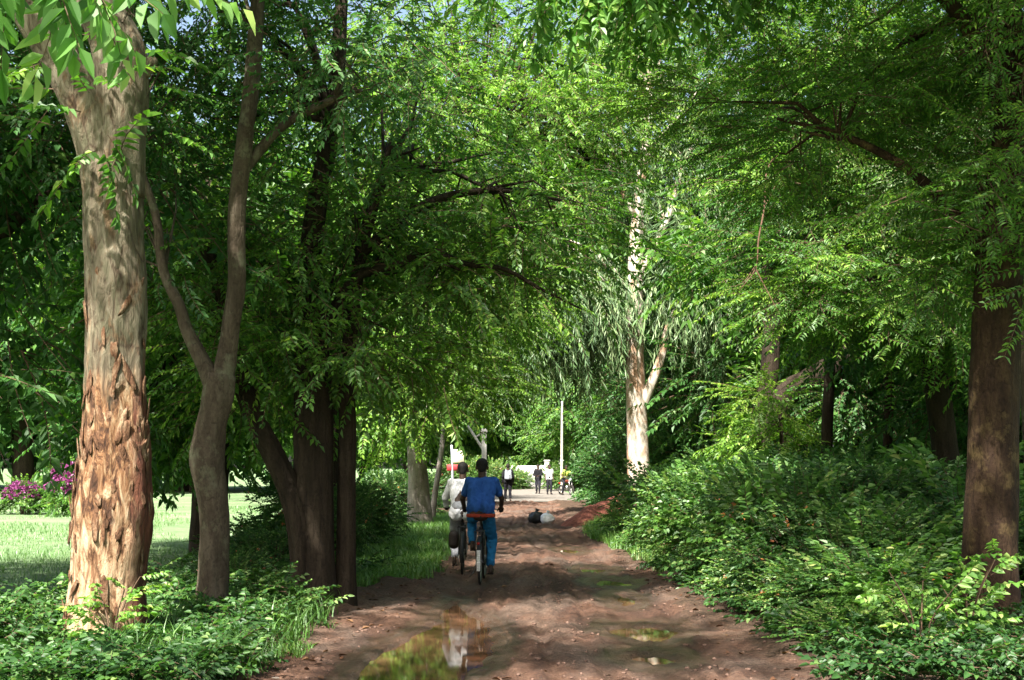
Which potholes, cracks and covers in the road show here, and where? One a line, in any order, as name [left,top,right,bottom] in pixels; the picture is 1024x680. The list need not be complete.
pothole [338,599,512,680]
pothole [594,621,698,646]
